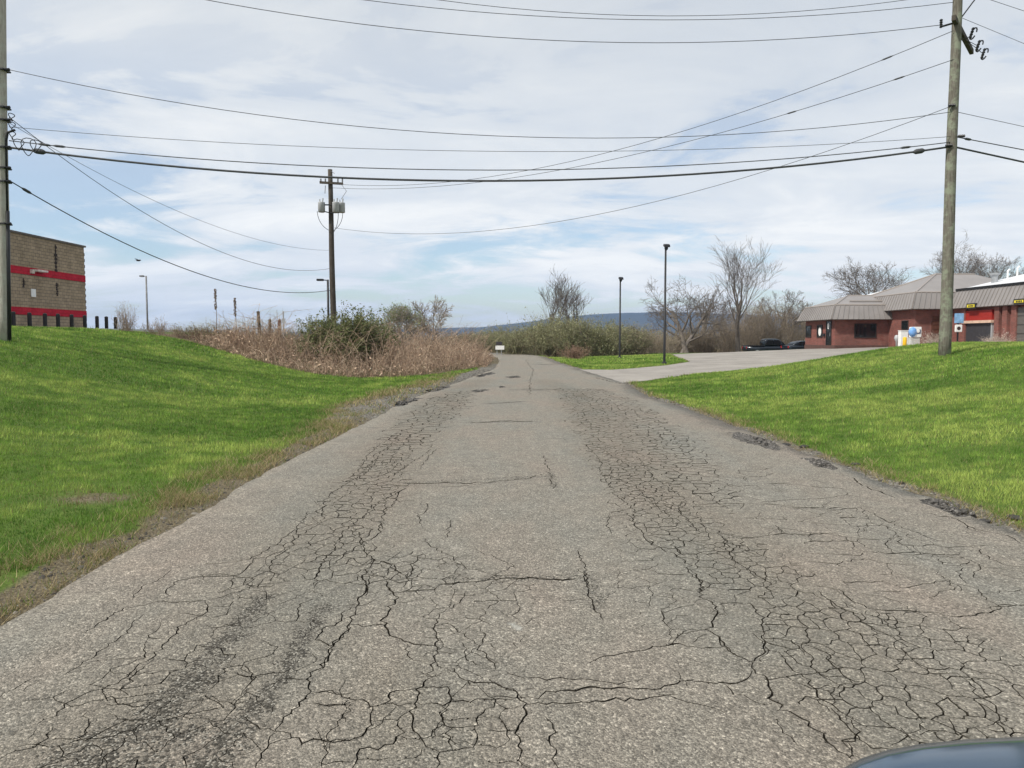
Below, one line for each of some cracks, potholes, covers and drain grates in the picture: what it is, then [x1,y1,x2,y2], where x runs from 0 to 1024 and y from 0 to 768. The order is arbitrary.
pothole [729,432,781,450]
pothole [394,398,423,407]
crack [0,388,1024,768]
pothole [799,457,838,470]
pothole [919,498,976,517]
